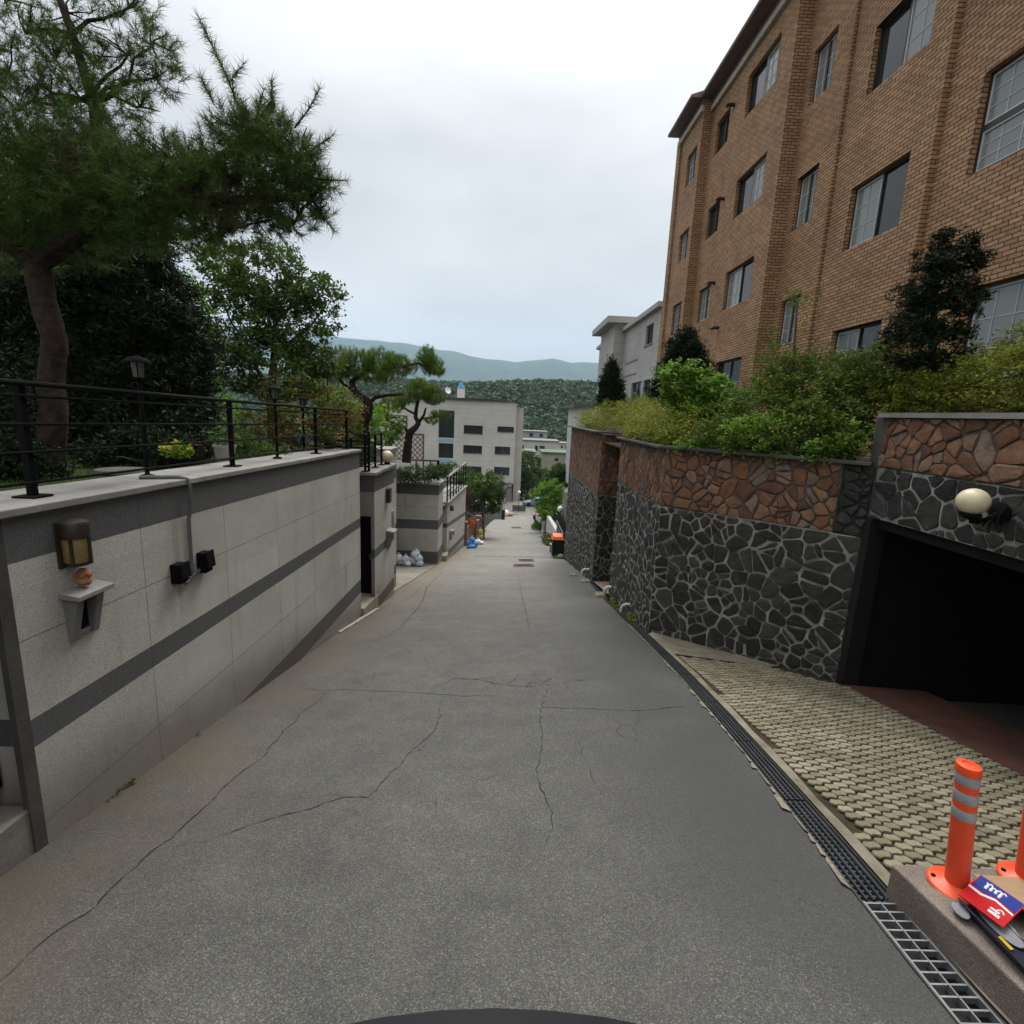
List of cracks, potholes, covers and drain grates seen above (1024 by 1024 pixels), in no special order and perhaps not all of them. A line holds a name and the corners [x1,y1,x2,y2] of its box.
crack [1,673,683,980]
